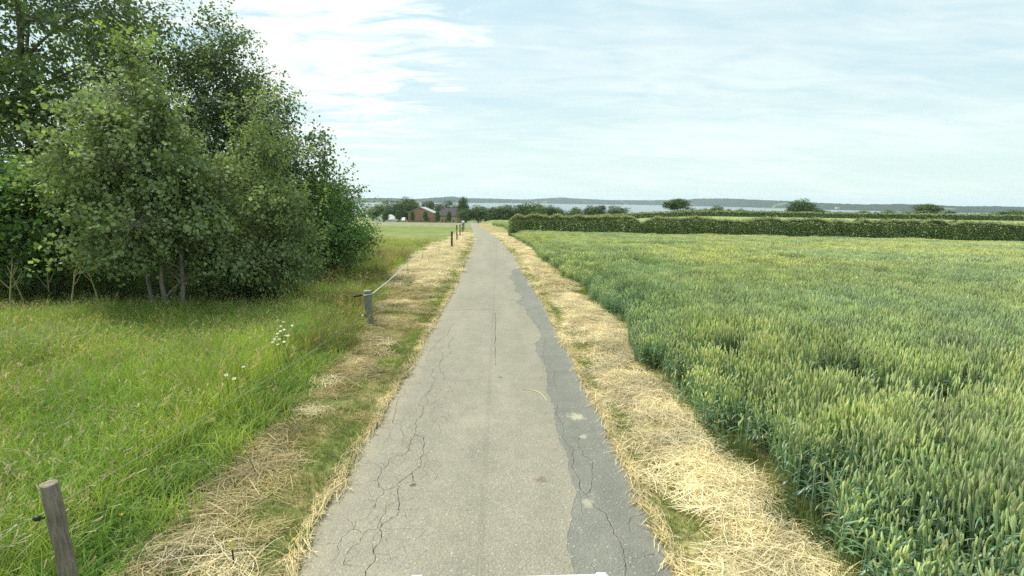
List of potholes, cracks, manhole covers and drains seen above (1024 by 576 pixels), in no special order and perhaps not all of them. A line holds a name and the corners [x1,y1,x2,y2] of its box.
crack [555,405,657,576]
crack [332,329,458,576]
